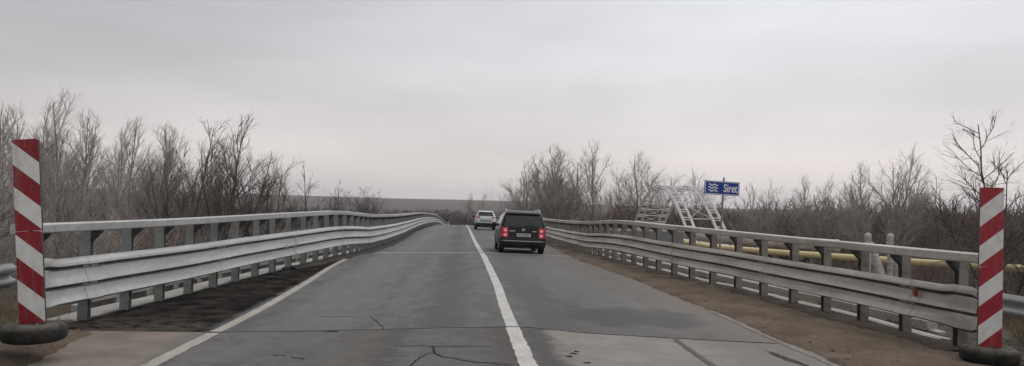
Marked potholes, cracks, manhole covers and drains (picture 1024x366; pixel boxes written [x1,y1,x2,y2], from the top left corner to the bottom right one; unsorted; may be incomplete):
crack [371,316,506,366]
